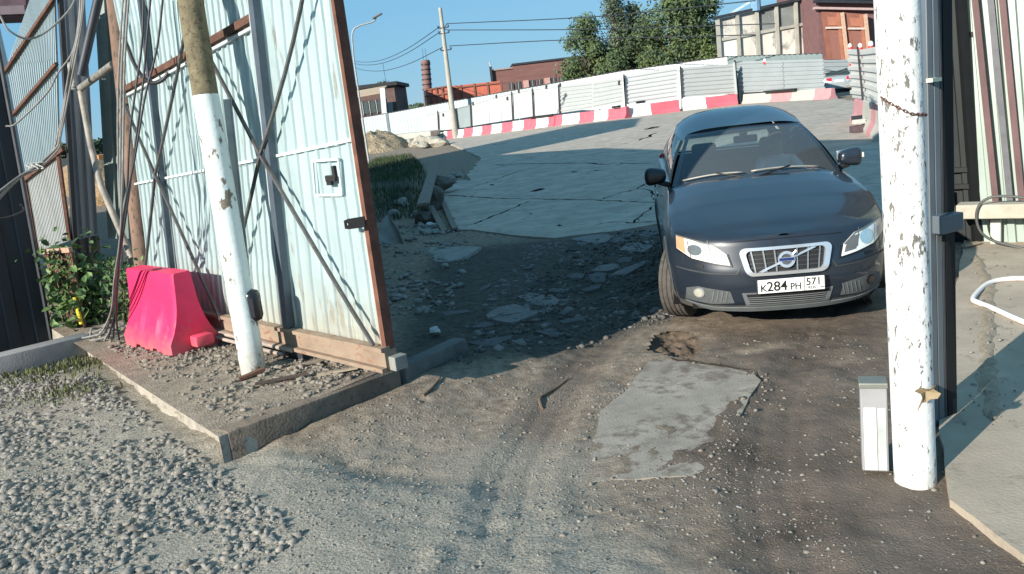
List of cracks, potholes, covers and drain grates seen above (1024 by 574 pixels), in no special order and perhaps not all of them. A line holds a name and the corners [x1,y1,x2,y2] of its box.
crack [599,184,655,224]
pothole [643,330,708,359]
